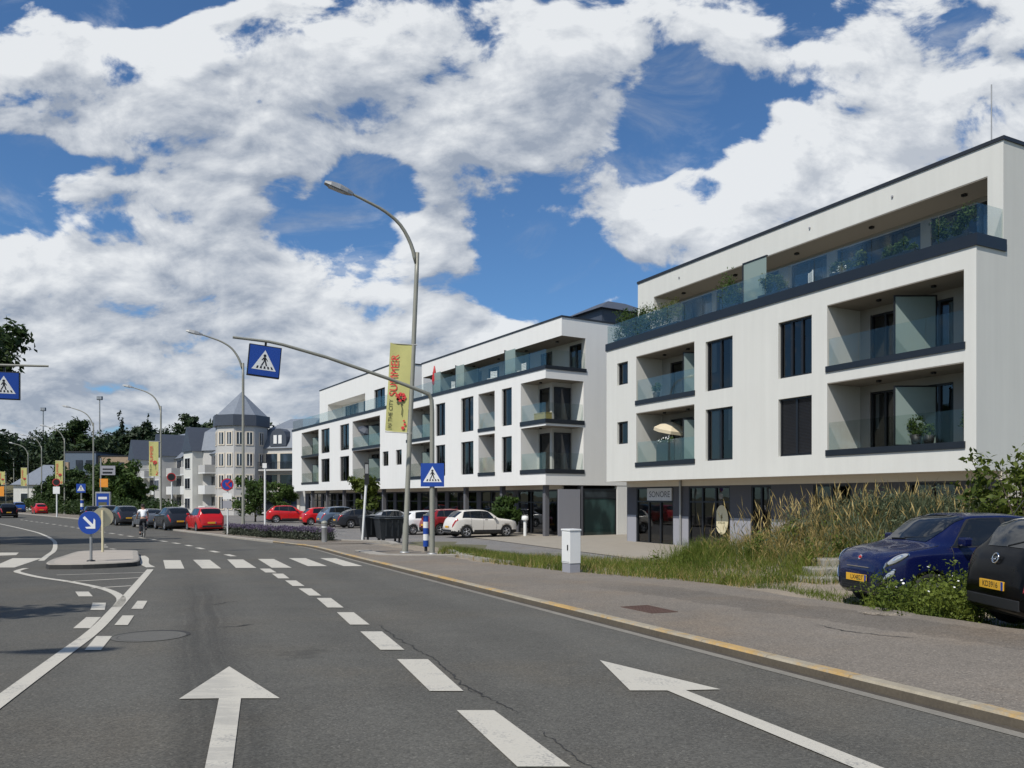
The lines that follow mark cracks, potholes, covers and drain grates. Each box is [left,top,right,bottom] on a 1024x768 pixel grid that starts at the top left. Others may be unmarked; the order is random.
manhole cover [621,605,678,613]
manhole cover [110,630,191,642]
crack [380,625,595,768]
